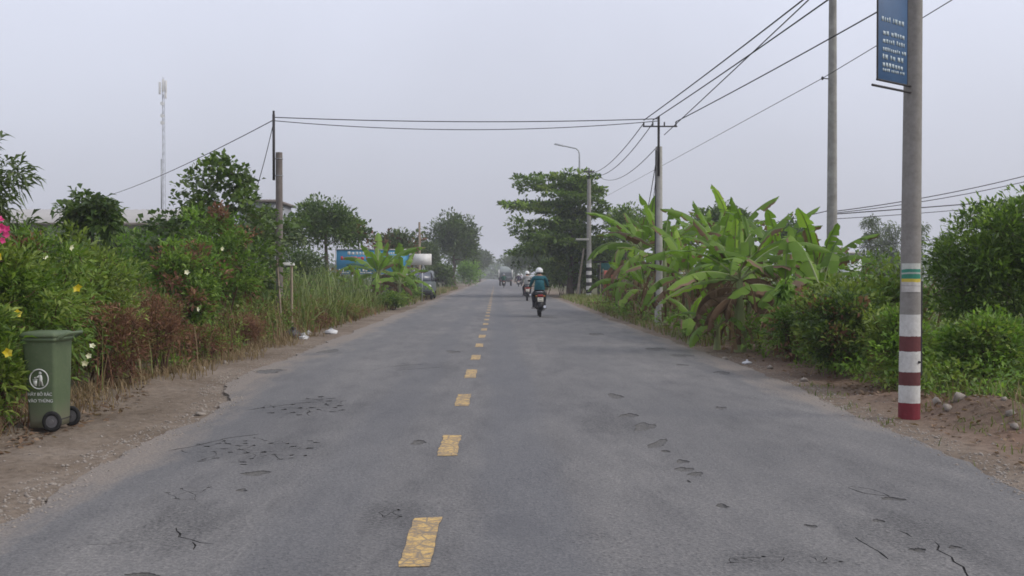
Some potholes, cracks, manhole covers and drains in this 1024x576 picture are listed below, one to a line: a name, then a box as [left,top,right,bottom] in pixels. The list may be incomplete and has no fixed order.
pothole [647,439,667,449]
pothole [634,422,656,432]
